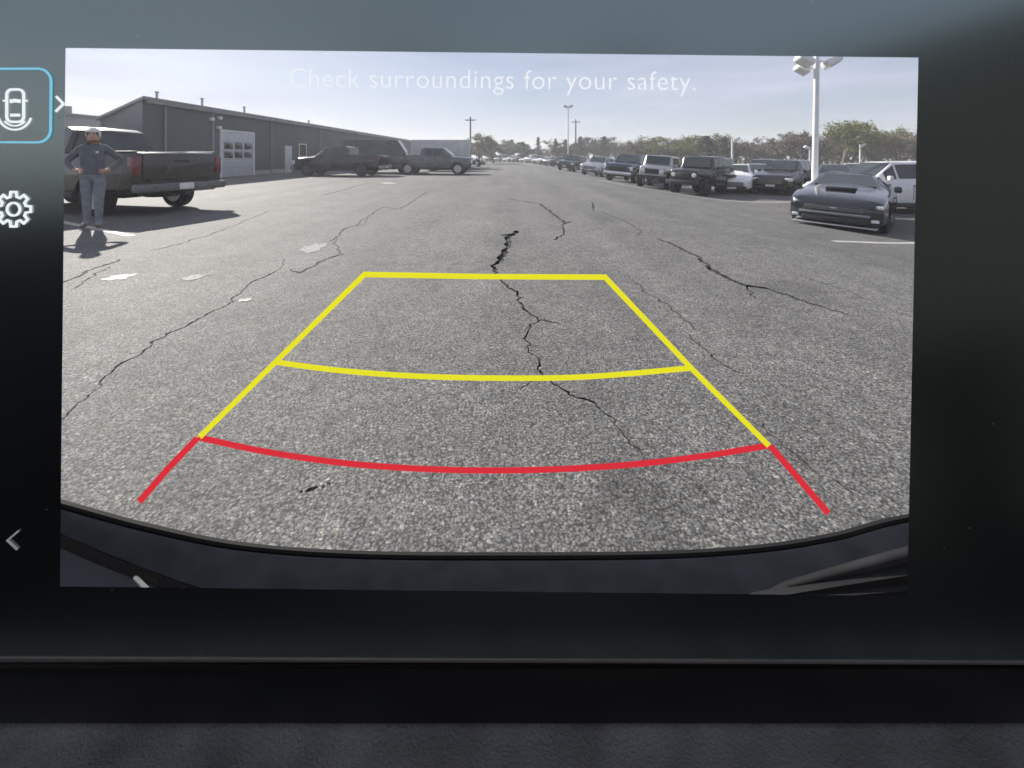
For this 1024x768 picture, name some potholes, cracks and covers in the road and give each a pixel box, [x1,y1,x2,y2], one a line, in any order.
crack [592,203,912,374]
crack [504,198,571,240]
crack [490,230,643,455]
crack [62,192,426,420]
